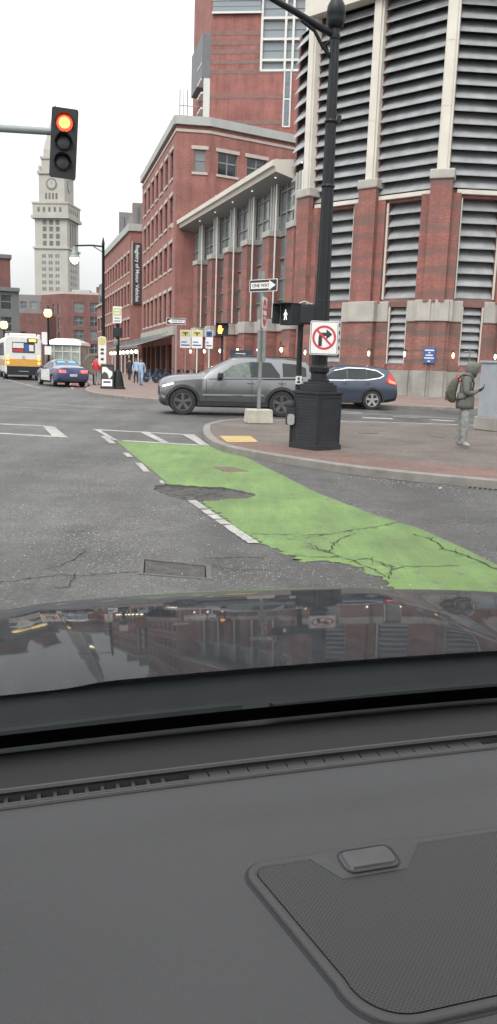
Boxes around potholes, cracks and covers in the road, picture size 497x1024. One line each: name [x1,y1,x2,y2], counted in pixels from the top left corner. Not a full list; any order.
manhole cover [138,558,212,580]
crack [252,522,497,578]
crack [1,549,136,588]
pothole [153,484,255,501]
